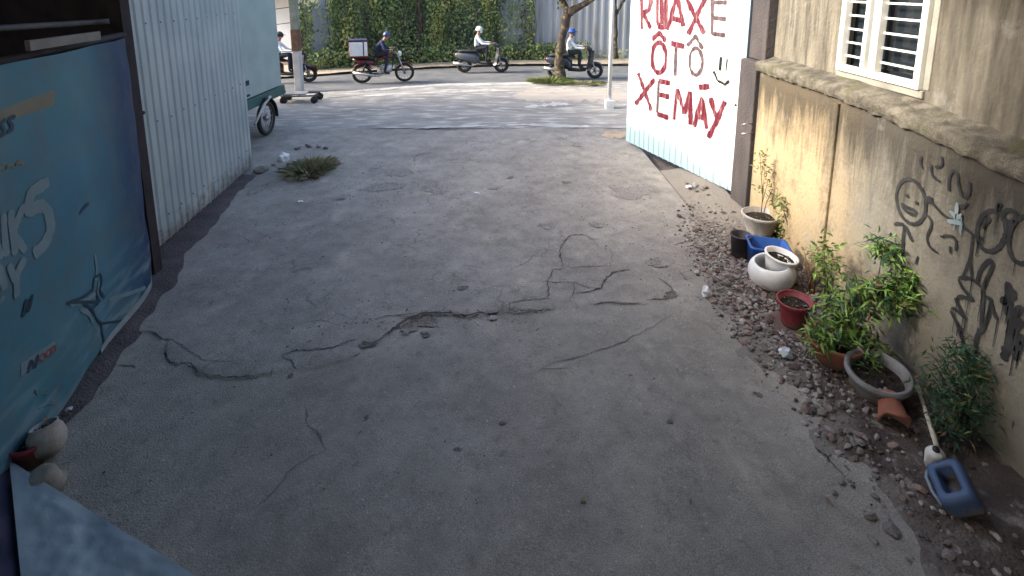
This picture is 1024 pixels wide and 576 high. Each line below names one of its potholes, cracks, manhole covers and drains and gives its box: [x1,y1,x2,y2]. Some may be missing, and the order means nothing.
pothole [419,313,441,327]
crack [814,446,845,478]
crack [120,233,686,379]
pothole [395,314,428,335]
crack [258,404,326,506]
